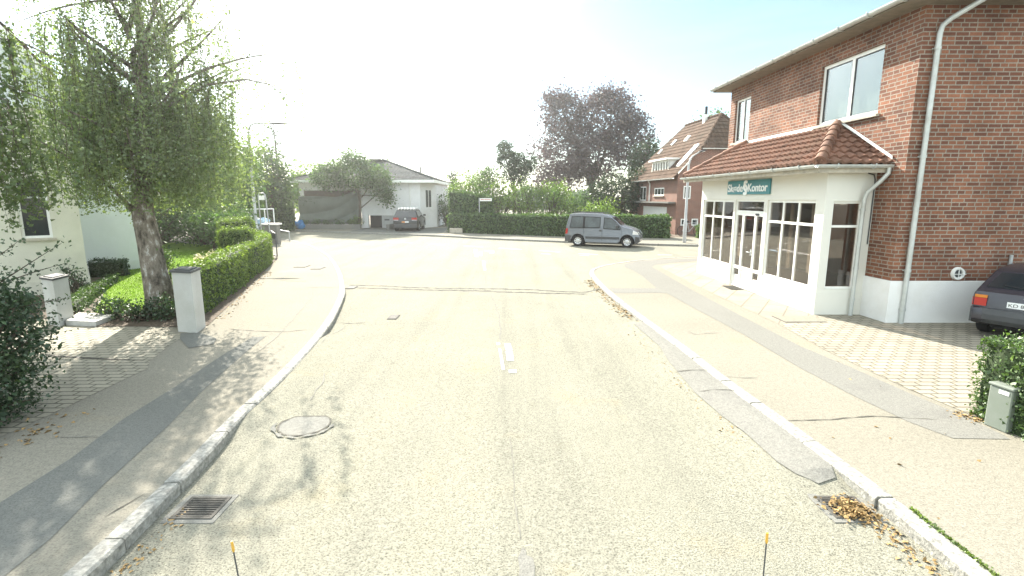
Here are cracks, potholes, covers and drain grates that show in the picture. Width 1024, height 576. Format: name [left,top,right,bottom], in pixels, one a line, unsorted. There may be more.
manhole cover [270,415,334,438]
drain grate [159,494,239,524]
drain grate [807,494,889,523]
